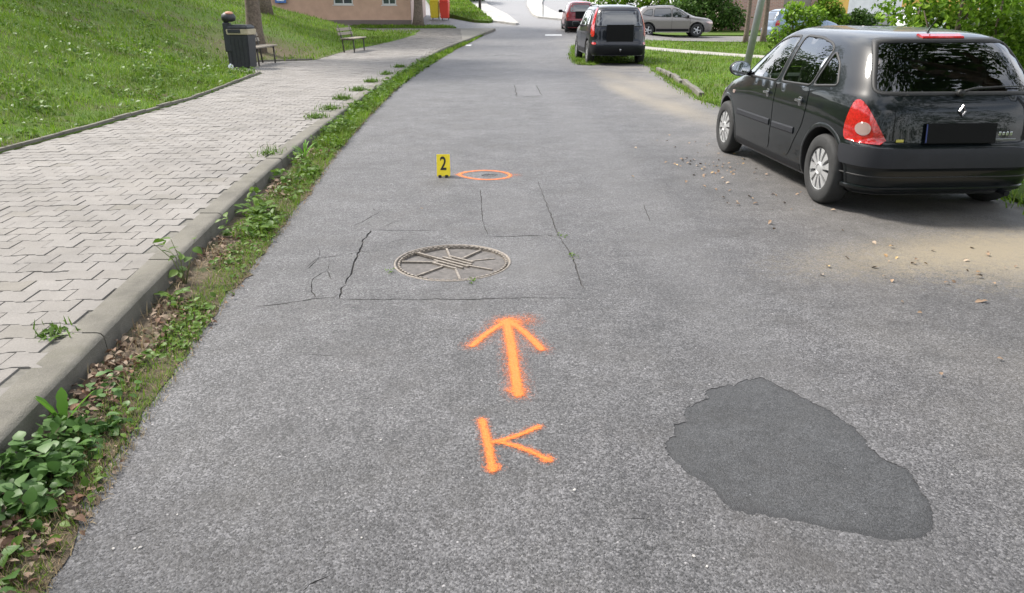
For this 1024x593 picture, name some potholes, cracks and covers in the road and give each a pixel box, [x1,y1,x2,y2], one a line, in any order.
crack [480,182,652,287]
crack [256,209,406,307]
manhole cover [394,244,511,282]
